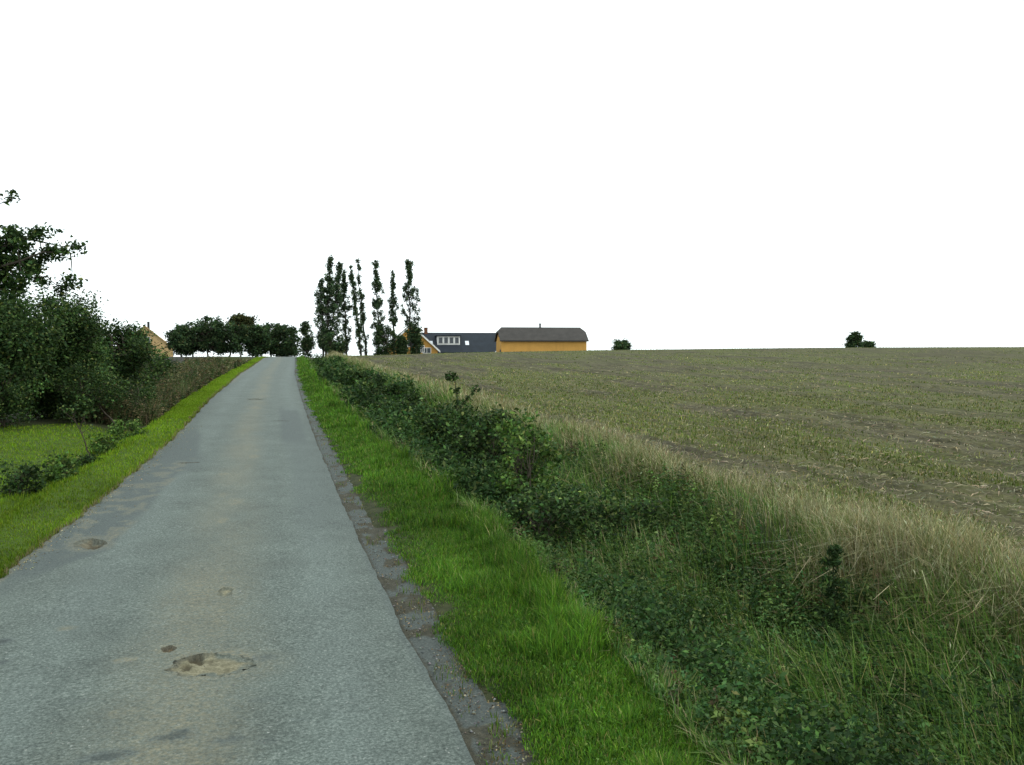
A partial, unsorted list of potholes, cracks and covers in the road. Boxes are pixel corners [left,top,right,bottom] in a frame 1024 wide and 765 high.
pothole [73,538,107,550]
pothole [165,652,256,678]
pothole [217,587,233,596]
